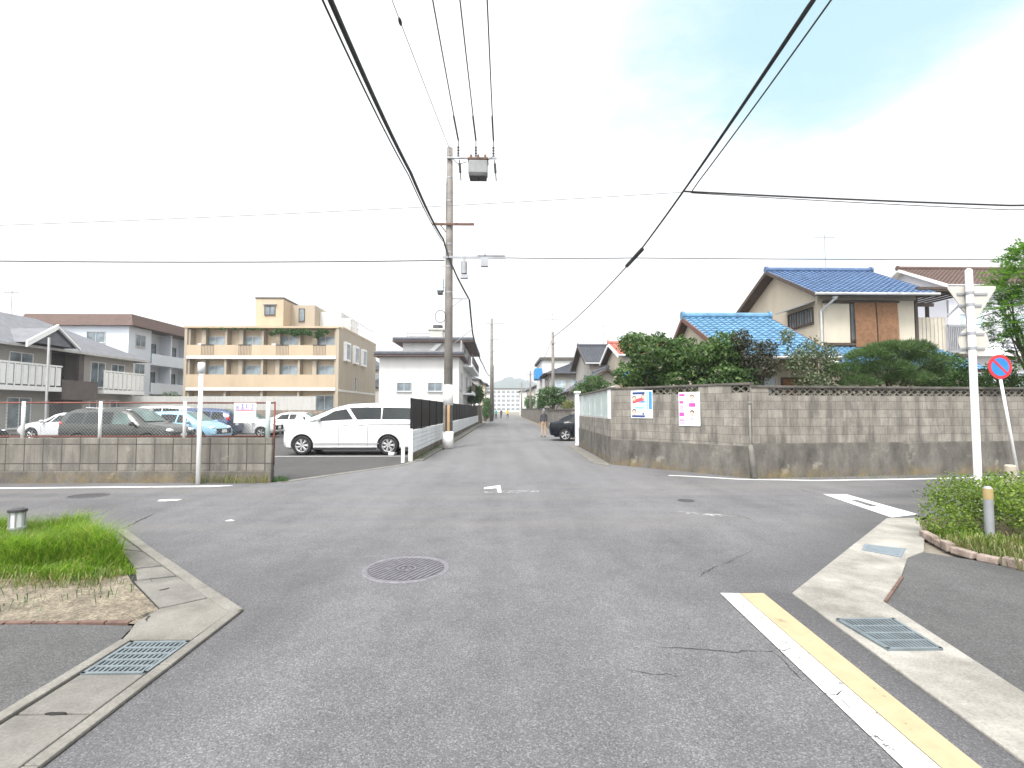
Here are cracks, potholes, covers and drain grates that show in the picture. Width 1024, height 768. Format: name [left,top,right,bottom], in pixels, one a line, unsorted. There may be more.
manhole cover [361,556,450,584]
drain grate [80,640,190,675]
drain grate [836,618,943,651]
crack [662,647,807,682]
